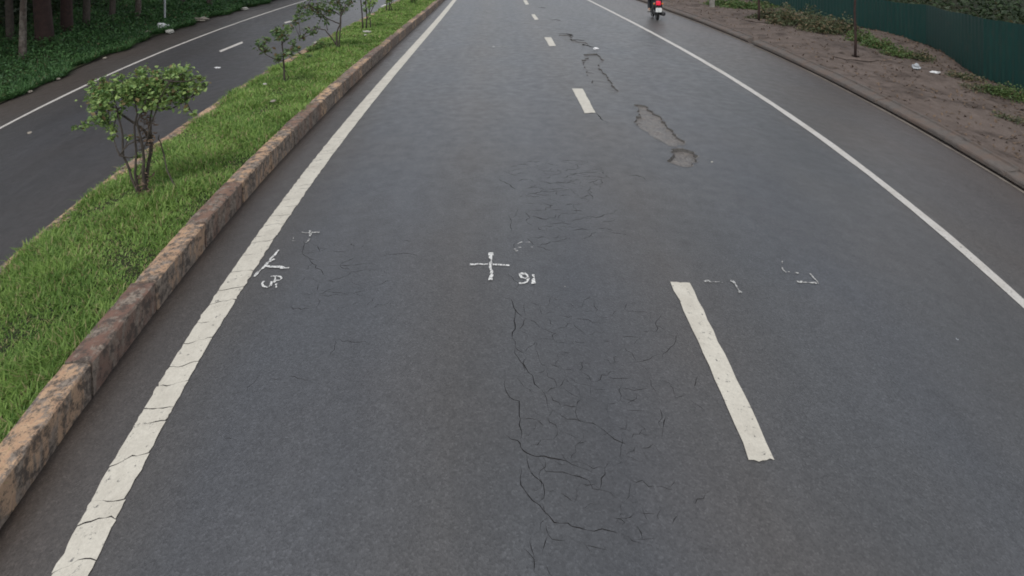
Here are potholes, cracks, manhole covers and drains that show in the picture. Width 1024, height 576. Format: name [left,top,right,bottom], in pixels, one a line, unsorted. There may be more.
crack [500,160,626,250]
pothole [667,149,699,167]
crack [292,240,408,309]
pothole [634,104,686,147]
